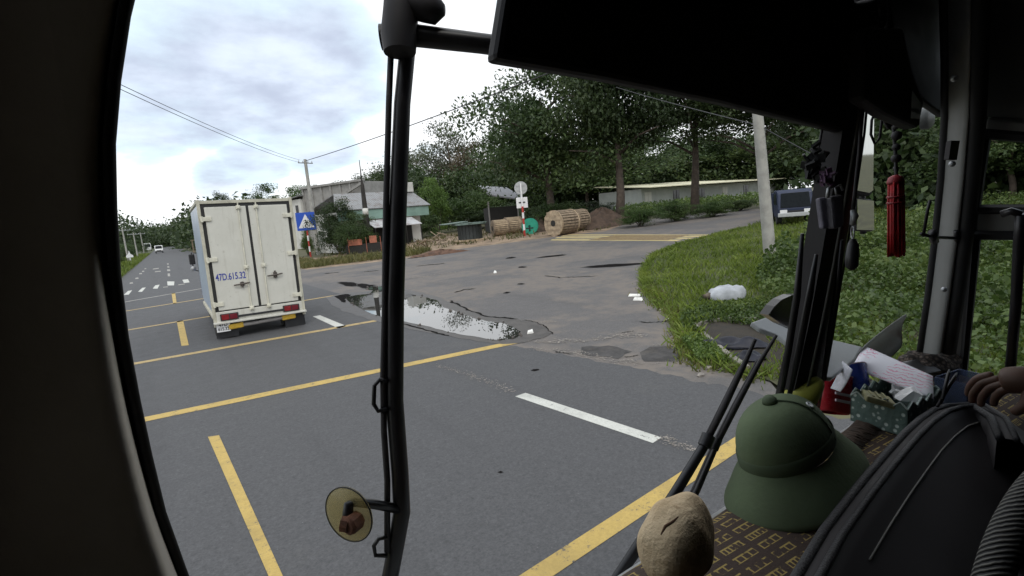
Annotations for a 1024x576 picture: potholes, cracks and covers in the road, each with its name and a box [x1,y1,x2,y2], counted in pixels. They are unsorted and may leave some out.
crack [655,435,696,453]
crack [436,363,516,392]
crack [592,321,670,346]
pothole [326,285,551,344]
